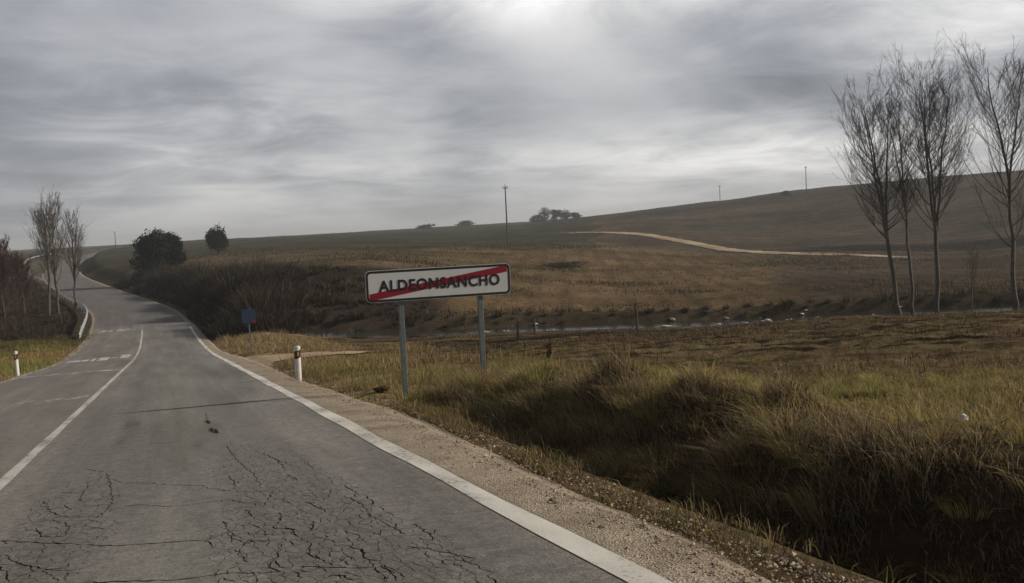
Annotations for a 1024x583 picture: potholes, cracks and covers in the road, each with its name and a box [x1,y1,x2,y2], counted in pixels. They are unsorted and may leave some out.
crack [0,441,497,583]
